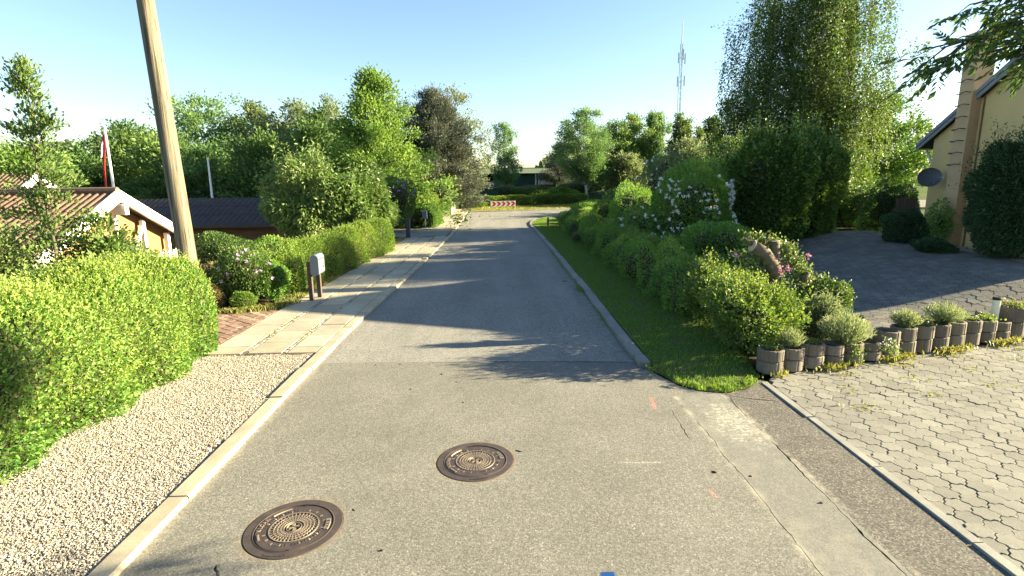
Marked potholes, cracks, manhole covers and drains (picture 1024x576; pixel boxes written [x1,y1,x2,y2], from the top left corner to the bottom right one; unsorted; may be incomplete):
manhole cover [242,500,344,560]
manhole cover [437,442,514,482]
